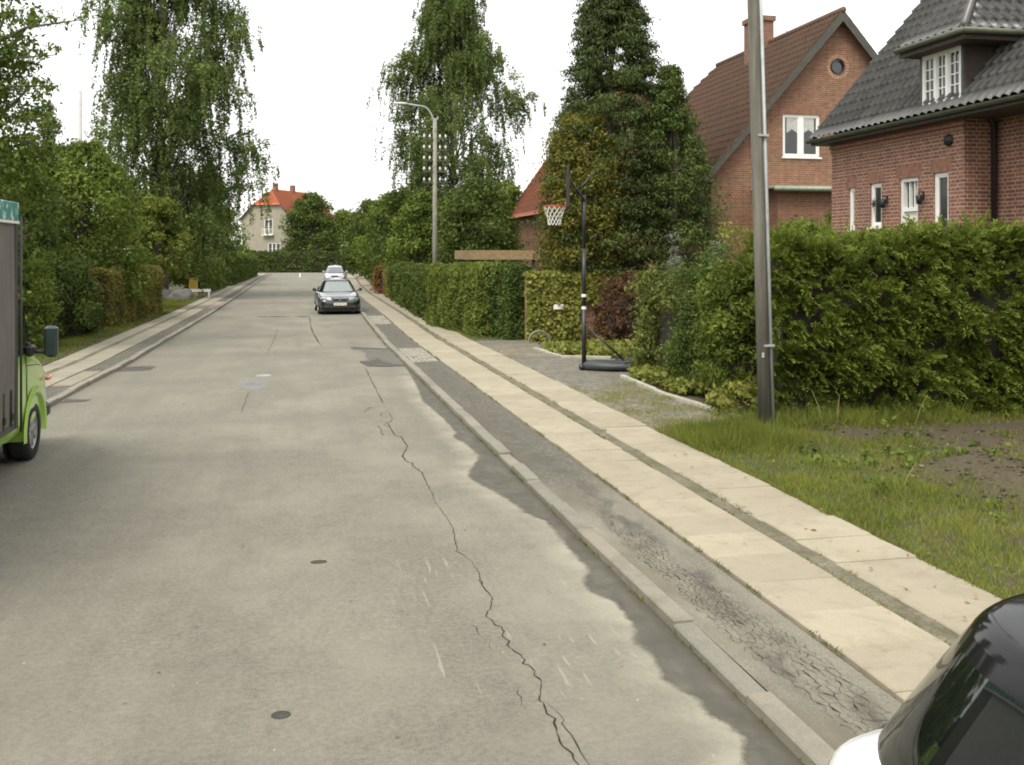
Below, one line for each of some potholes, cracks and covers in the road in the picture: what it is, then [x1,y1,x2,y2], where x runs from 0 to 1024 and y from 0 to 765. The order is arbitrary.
crack [596,513,891,734]
crack [260,316,321,351]
crack [365,407,589,765]
utility cover [271,711,291,719]
